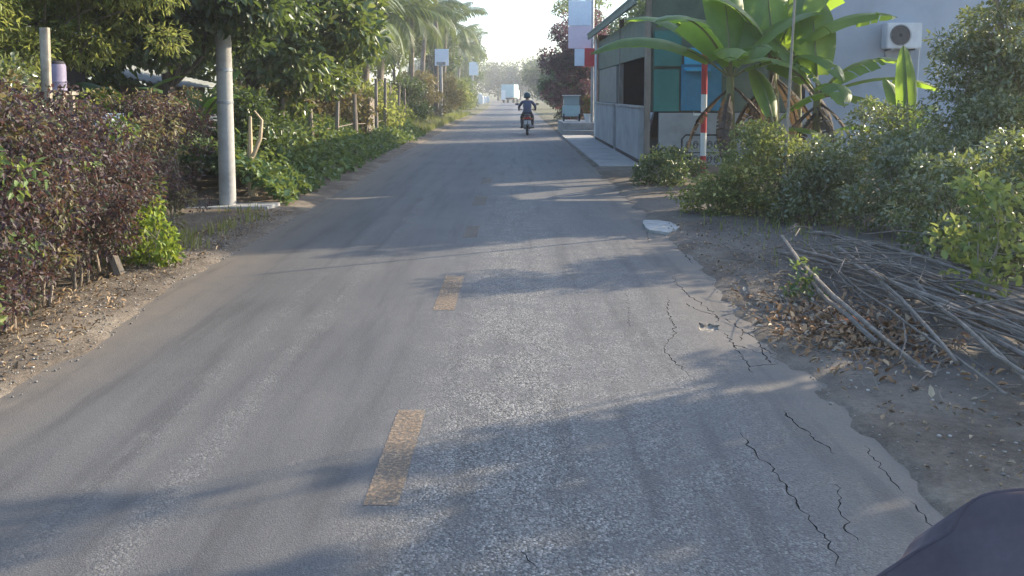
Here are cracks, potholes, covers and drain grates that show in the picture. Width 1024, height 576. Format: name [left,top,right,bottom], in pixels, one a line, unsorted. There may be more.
crack [740,433,859,565]
crack [867,447,933,526]
crack [664,278,778,377]
crack [785,412,834,454]
